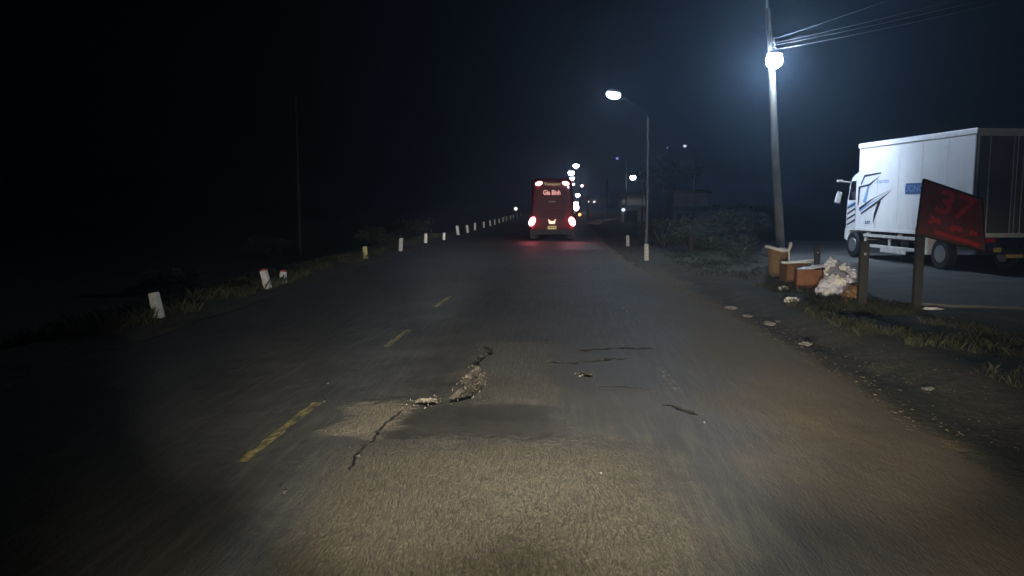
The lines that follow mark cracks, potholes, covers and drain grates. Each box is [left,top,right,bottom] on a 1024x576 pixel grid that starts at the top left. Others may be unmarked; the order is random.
crack [546,346,654,364]
crack [346,402,410,470]
crack [601,386,703,415]
pothole [406,395,441,409]
pothole [441,365,487,404]
